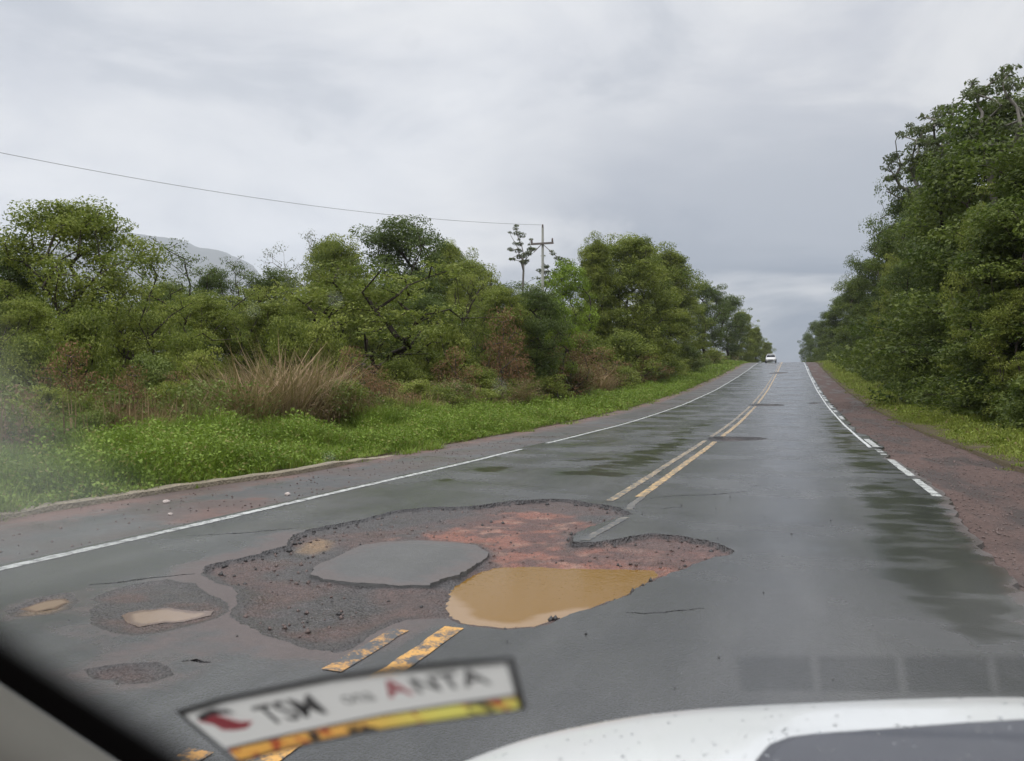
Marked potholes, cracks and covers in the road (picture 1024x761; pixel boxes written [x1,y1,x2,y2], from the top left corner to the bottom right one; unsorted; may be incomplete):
crack [91,574,190,585]
pothole [201,499,734,653]
pothole [89,579,230,636]
pothole [4,593,79,617]
